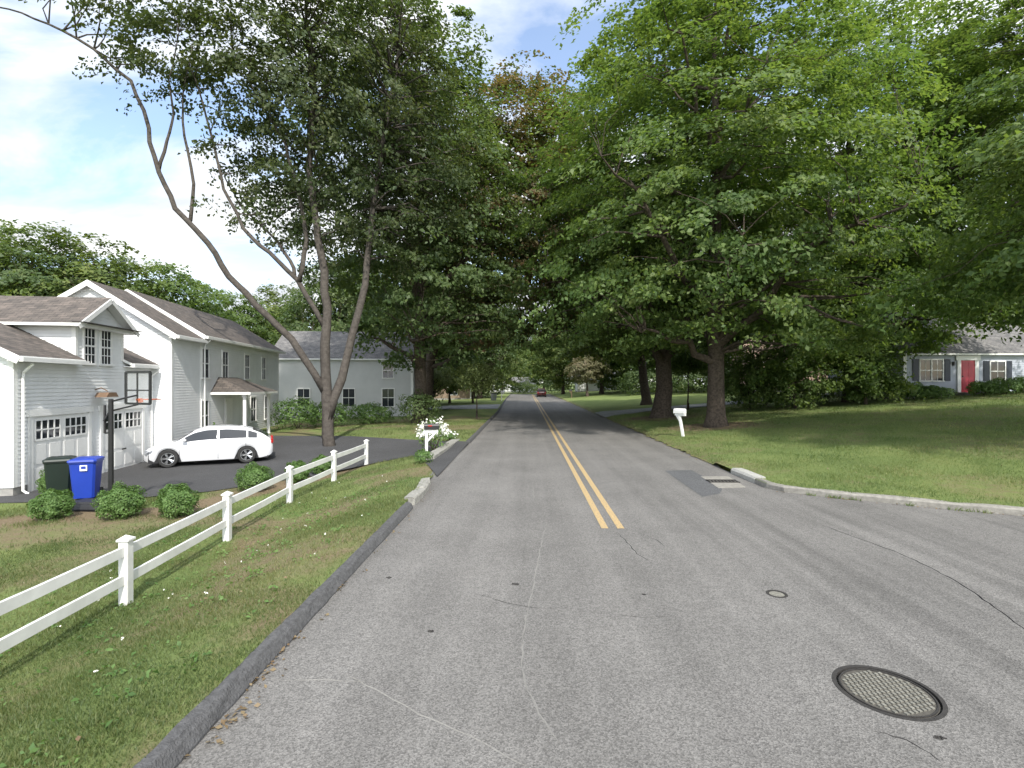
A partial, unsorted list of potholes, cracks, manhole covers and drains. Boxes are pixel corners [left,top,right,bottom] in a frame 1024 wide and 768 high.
crack [875,731,941,762]
crack [272,527,566,766]
drain grate [701,476,745,488]
manhole cover [832,665,948,722]
utility cover [766,590,788,598]
